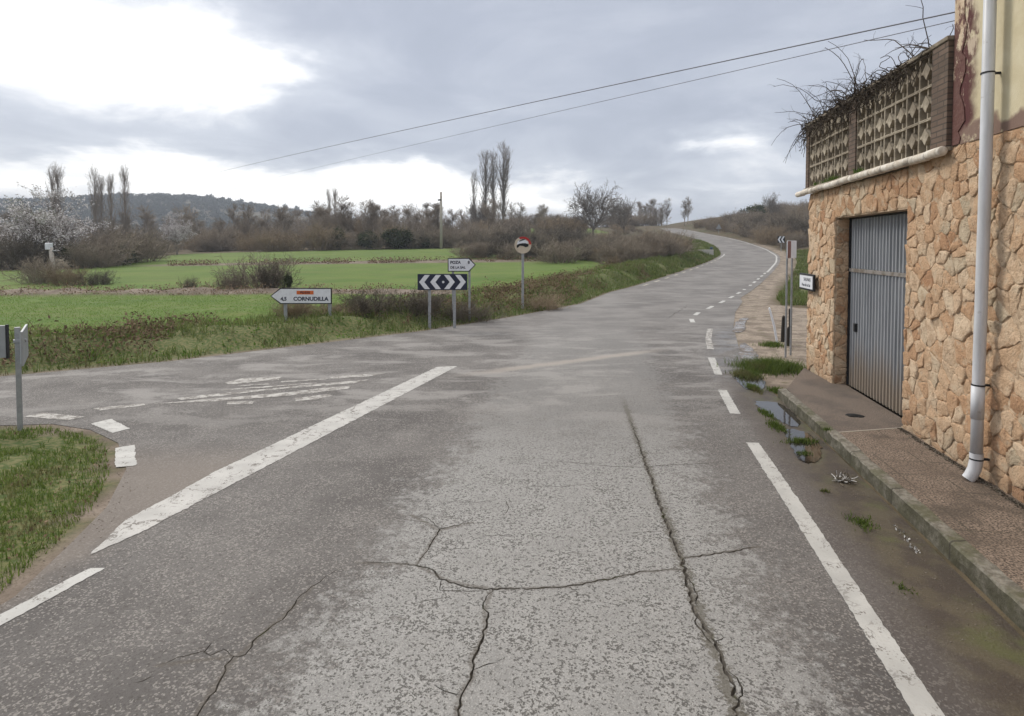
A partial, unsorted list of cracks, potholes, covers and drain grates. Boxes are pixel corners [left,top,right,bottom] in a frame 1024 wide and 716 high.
crack [370,422,756,716]
crack [136,570,336,716]
